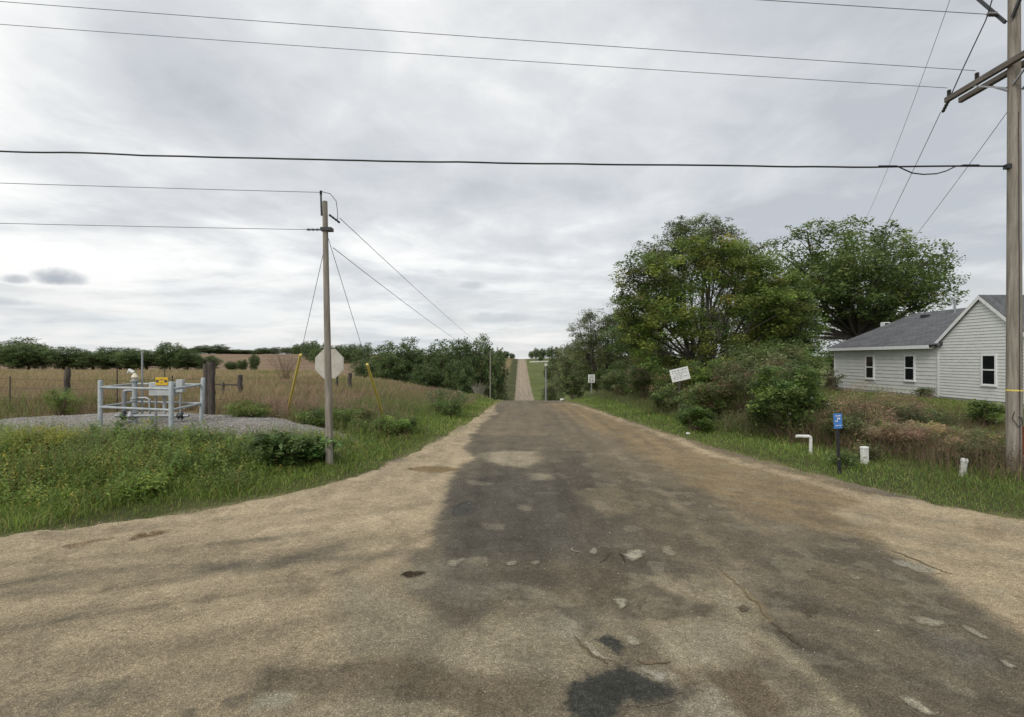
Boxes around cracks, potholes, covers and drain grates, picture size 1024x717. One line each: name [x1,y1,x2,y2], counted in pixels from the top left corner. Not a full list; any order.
crack [892,550,949,573]
crack [574,635,608,663]
pothole [623,548,647,561]
crack [716,565,802,647]
pothole [400,570,427,578]
